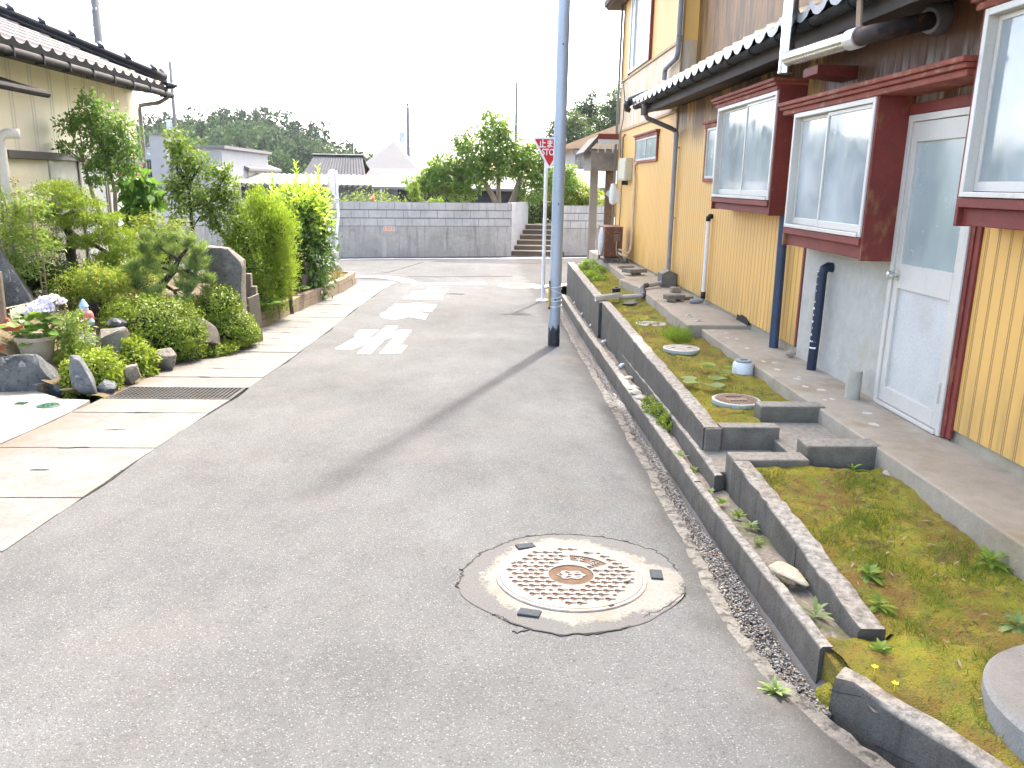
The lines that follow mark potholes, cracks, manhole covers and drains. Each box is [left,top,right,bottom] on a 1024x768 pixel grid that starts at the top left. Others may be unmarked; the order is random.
drain grate [107,387,246,401]
manhole cover [458,534,685,634]
utility cover [712,393,761,409]
utility cover [663,344,700,355]
